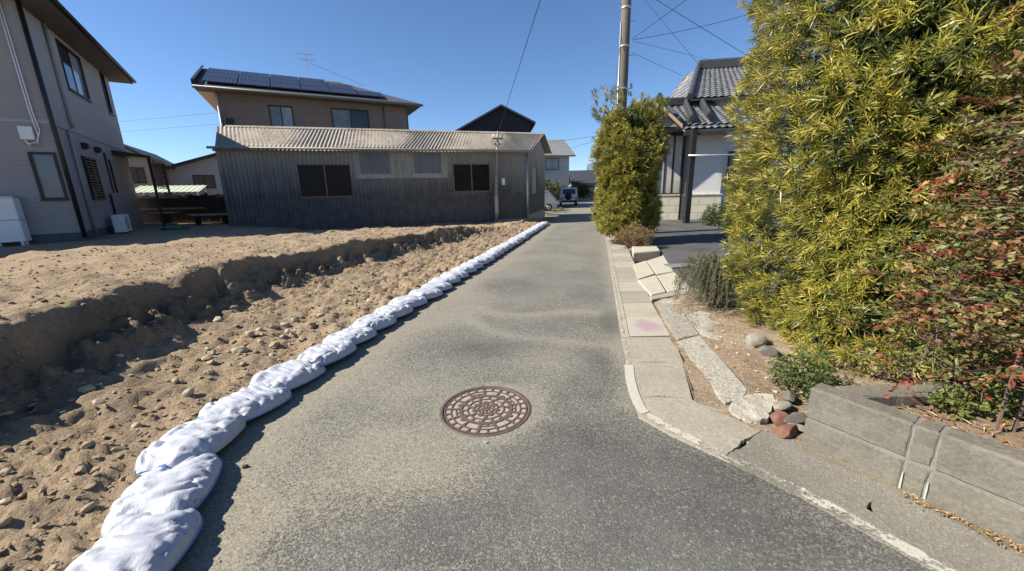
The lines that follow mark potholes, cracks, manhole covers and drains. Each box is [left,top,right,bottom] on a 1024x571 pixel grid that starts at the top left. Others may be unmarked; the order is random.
manhole cover [440,386,531,437]
crack [726,430,762,456]
